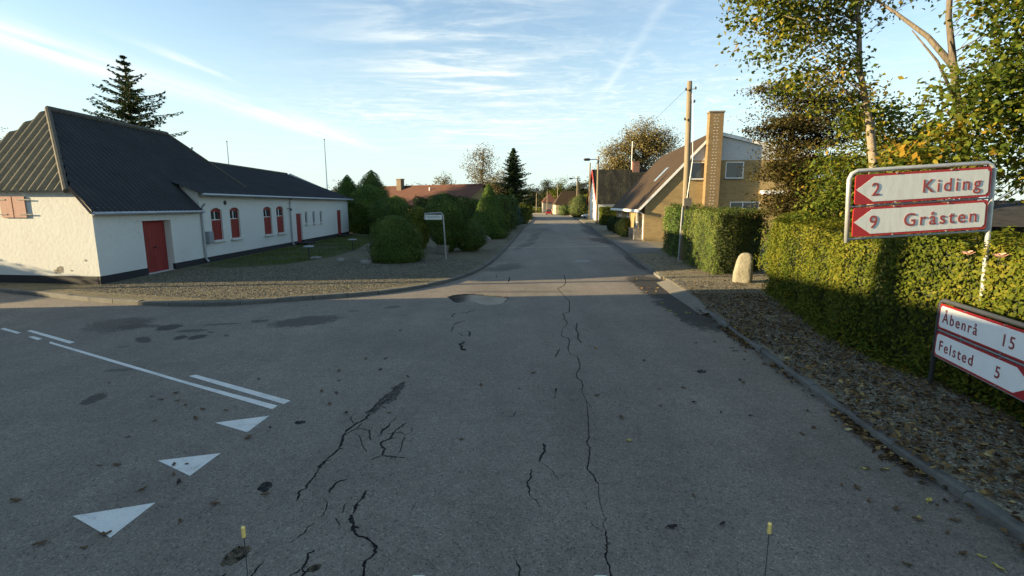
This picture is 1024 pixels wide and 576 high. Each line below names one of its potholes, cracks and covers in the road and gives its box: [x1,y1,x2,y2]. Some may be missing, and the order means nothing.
crack [289,406,413,576]
crack [555,275,612,576]
pothole [448,294,509,305]
crack [526,443,558,507]
